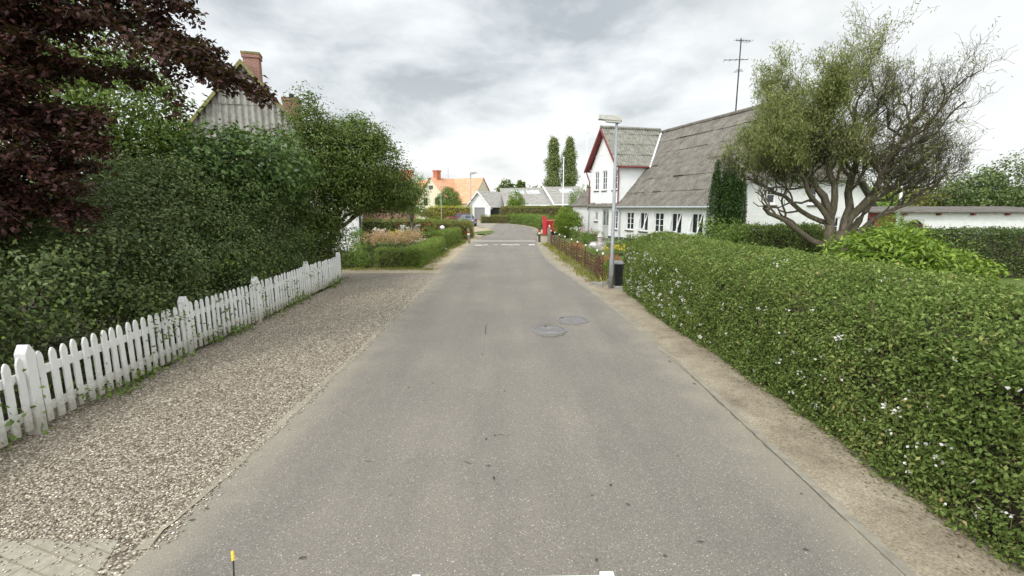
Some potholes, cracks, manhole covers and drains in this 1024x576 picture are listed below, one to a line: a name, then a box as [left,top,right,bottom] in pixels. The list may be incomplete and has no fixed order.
manhole cover [557,316,589,324]
manhole cover [532,325,567,335]
